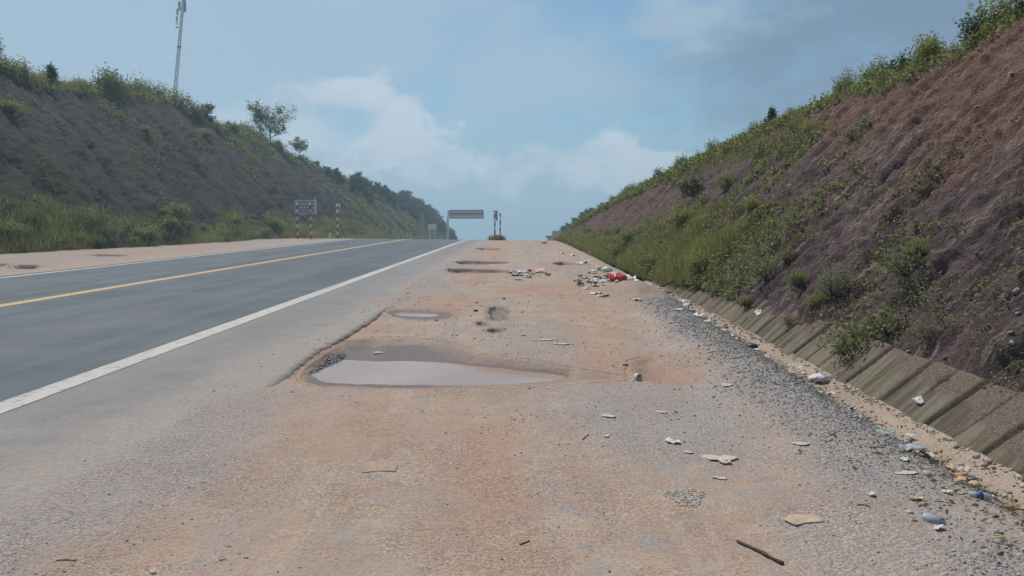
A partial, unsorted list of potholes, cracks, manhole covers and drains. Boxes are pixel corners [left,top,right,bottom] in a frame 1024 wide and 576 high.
pothole [295,337,629,390]
pothole [625,357,709,386]
pothole [485,306,511,321]
pothole [382,308,460,321]
